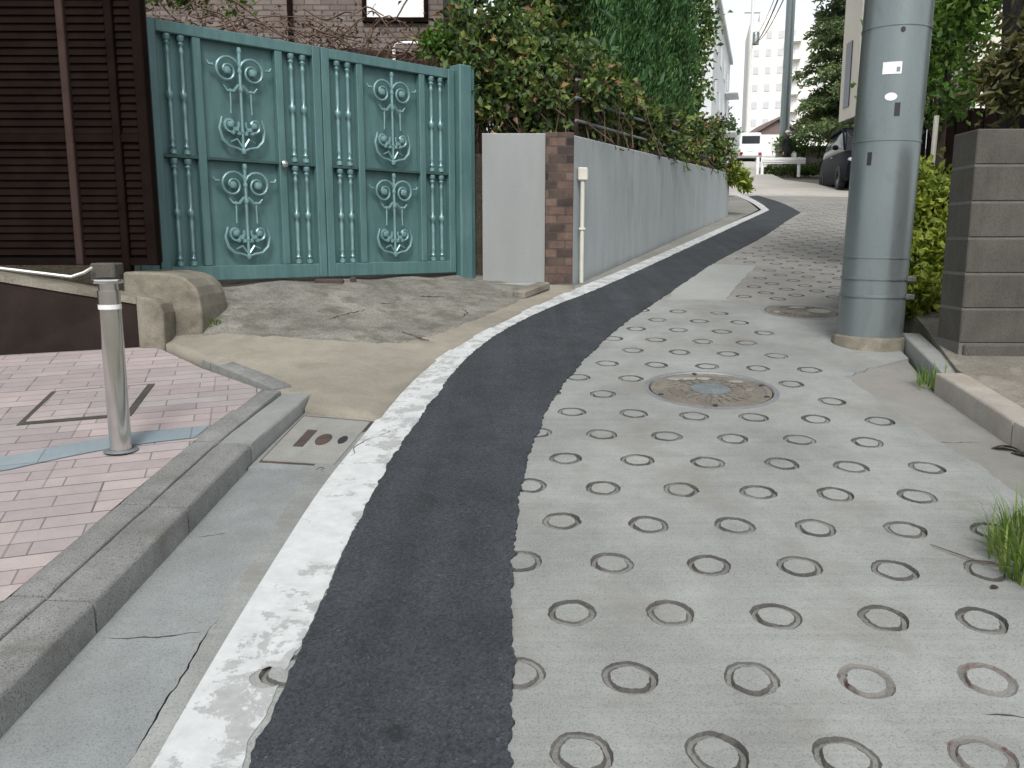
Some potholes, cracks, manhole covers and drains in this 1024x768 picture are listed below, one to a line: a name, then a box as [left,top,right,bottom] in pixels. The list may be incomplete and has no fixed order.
manhole cover [643,371,780,410]
manhole cover [761,304,838,319]
utility cover [248,413,374,471]
crack [101,622,216,766]
